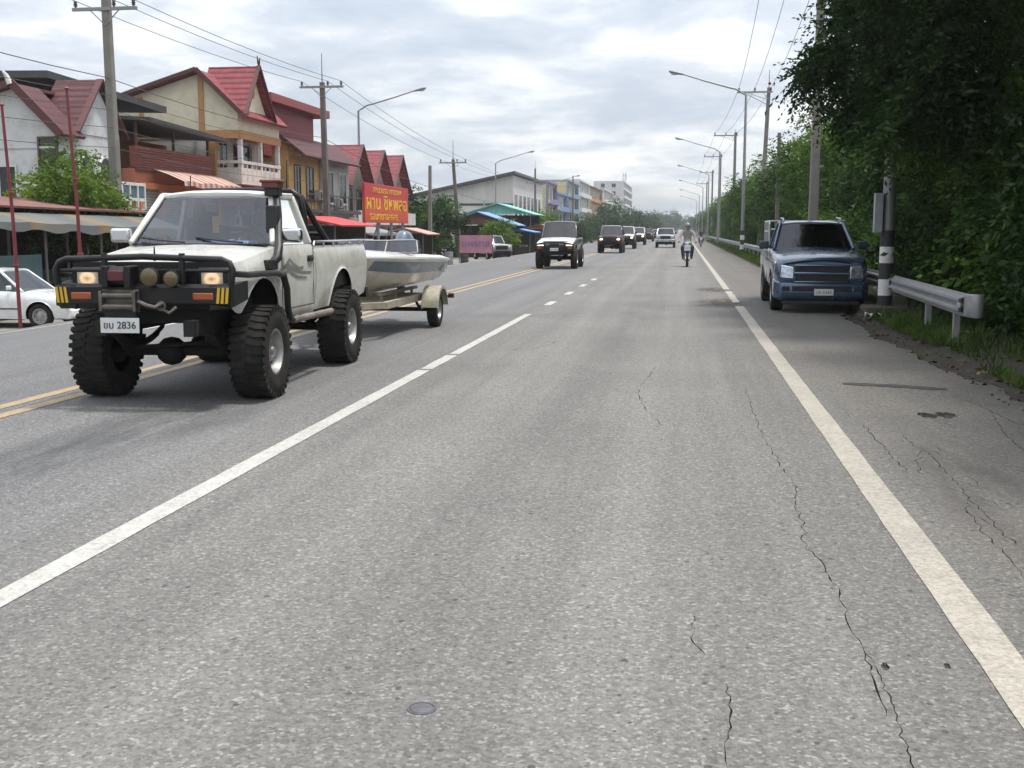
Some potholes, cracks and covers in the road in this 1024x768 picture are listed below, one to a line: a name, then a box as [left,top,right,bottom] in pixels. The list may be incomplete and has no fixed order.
manhole cover [407,702,437,715]
crack [745,389,914,768]
crack [863,426,1023,577]
crack [967,401,1024,450]
crack [724,685,733,765]
